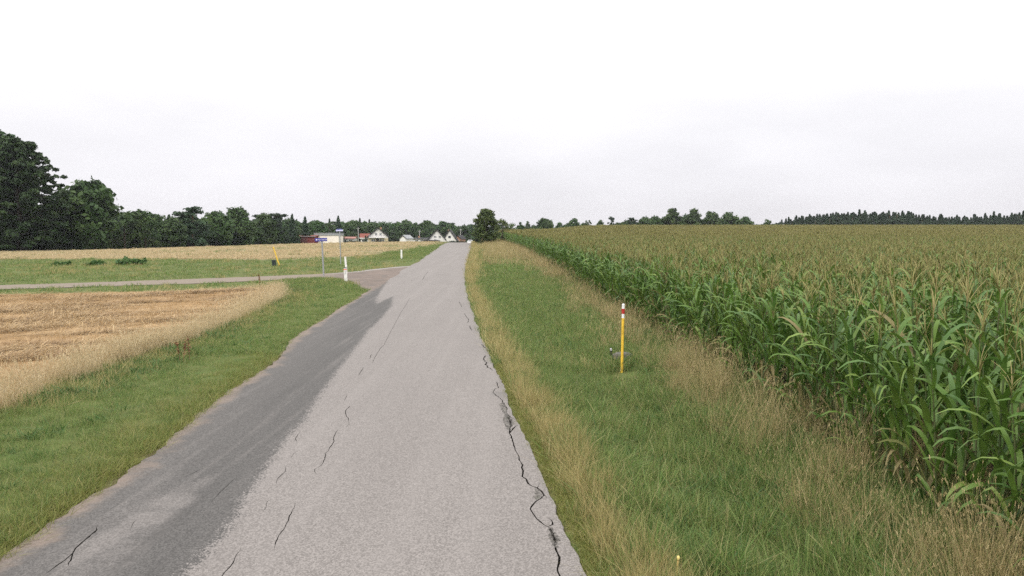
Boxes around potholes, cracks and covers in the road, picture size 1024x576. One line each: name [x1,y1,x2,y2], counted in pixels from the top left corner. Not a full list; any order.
crack [459,302,561,576]
crack [47,525,98,573]
